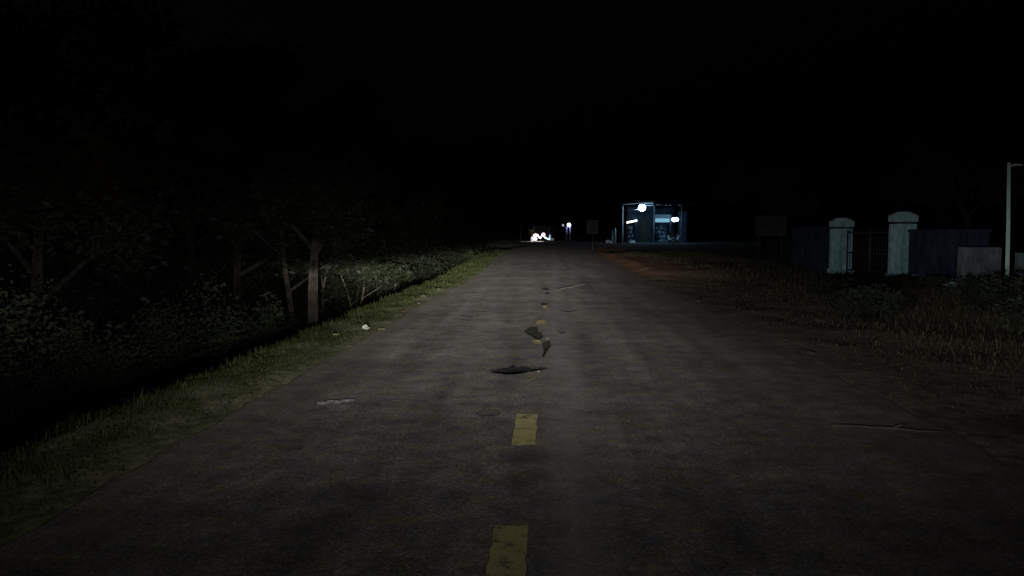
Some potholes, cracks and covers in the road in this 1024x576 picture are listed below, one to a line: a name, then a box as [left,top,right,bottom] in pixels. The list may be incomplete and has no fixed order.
pothole [488,365,548,374]
pothole [524,326,544,340]
